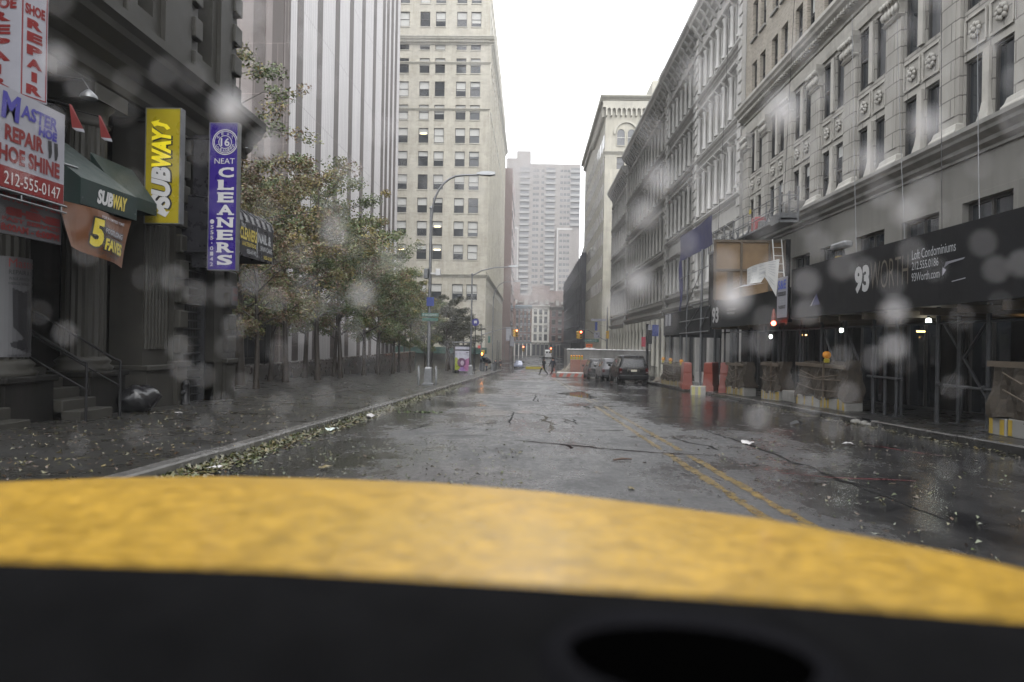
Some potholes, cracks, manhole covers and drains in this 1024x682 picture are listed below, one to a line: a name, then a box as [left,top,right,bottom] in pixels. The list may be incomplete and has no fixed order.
pothole [557,391,597,399]
crack [561,385,943,519]
